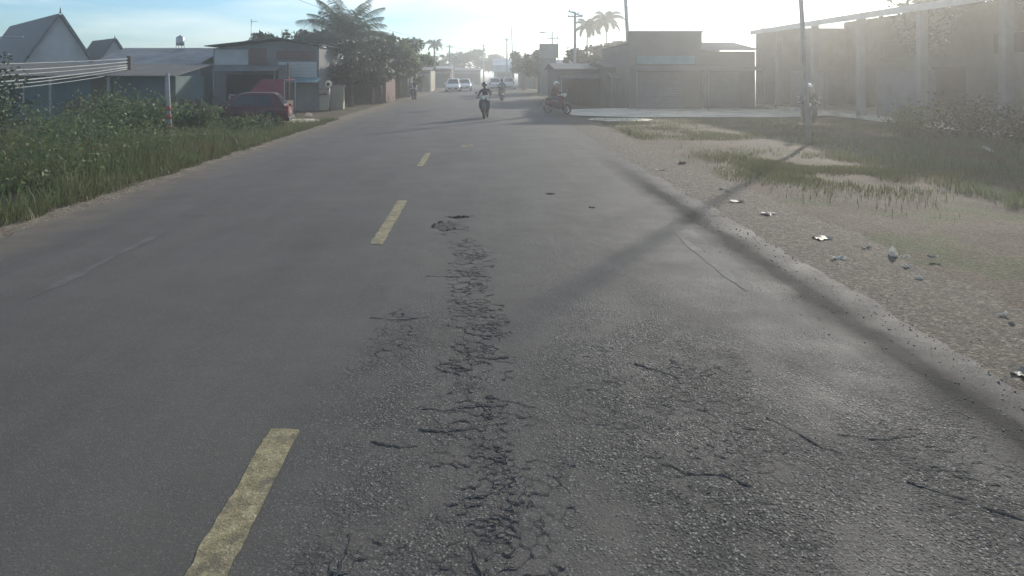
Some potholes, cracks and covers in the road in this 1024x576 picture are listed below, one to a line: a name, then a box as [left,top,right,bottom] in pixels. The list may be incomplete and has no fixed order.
crack [371,215,579,576]
pothole [432,221,456,231]
crack [345,308,429,380]
crack [540,329,1024,575]
